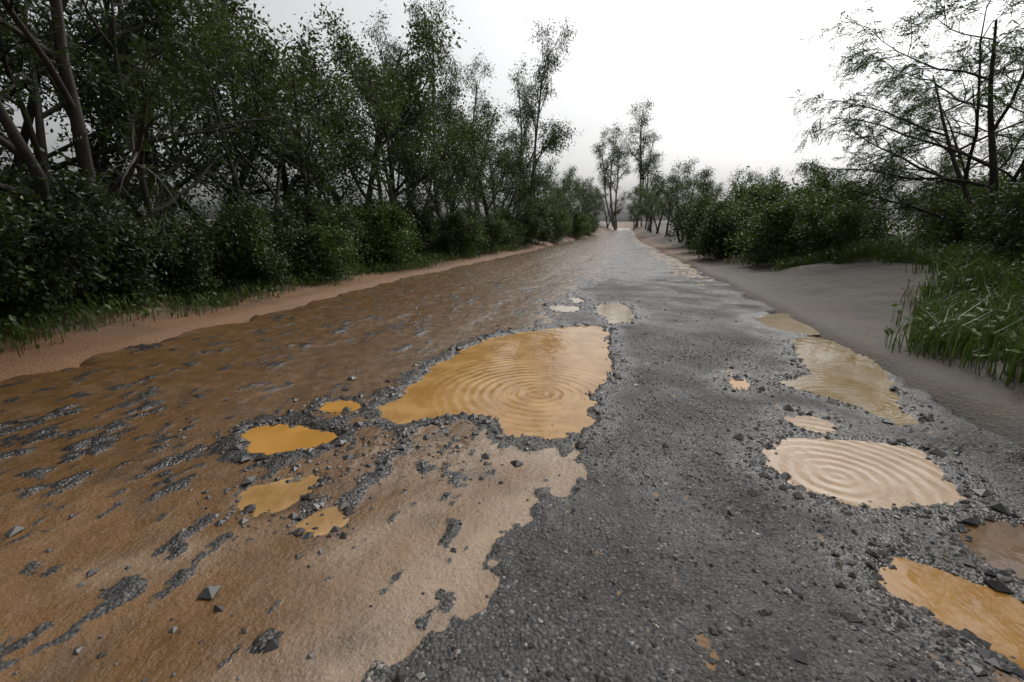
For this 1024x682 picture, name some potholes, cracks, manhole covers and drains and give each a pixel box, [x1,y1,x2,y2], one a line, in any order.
pothole [217,468,330,523]
pothole [723,374,756,392]
pothole [285,500,358,540]
pothole [775,334,928,428]
pothole [362,323,621,441]
pothole [778,410,850,434]
pothole [229,416,351,458]
pothole [542,304,586,312]
pothole [751,313,820,337]
pothole [752,431,980,515]
pothole [857,544,1024,669]
pothole [308,396,375,417]
